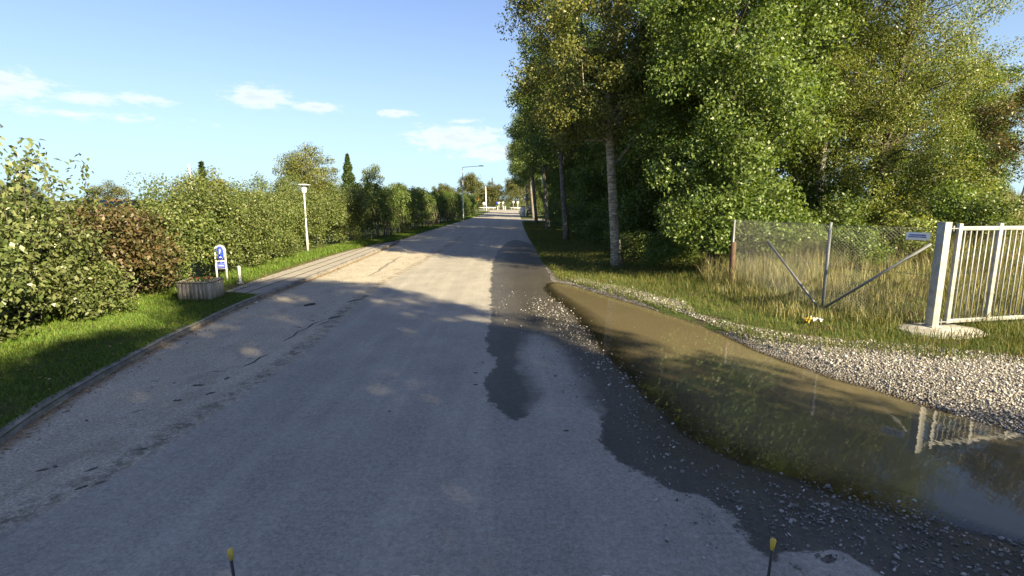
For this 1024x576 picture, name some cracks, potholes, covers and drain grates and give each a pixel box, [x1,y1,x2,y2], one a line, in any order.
crack [243,320,331,367]
